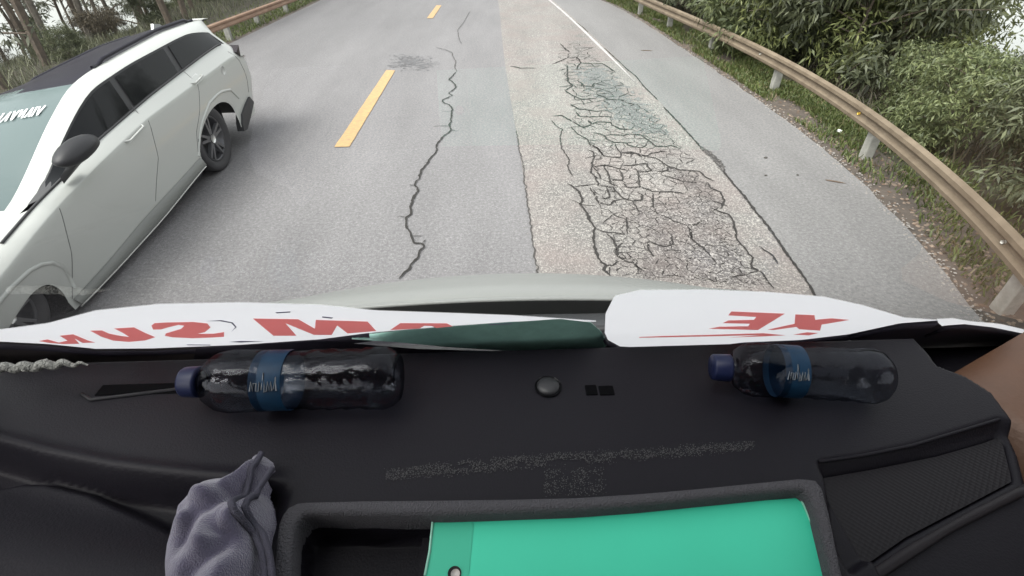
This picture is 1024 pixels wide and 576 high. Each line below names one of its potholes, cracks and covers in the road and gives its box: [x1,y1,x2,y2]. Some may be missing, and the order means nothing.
crack [552,22,817,296]
crack [398,13,469,279]
